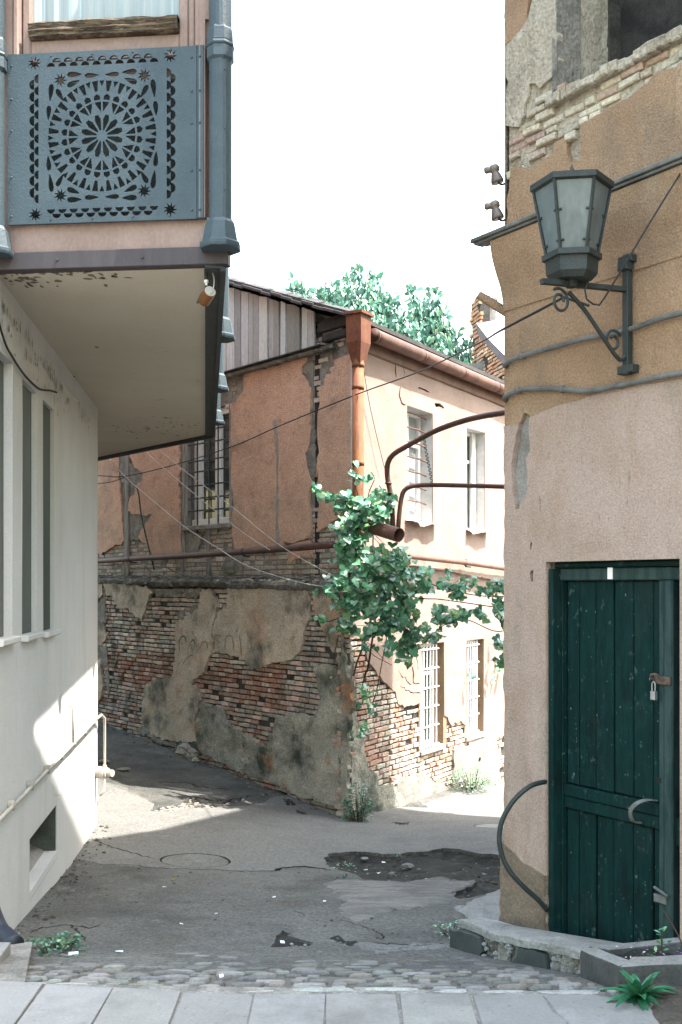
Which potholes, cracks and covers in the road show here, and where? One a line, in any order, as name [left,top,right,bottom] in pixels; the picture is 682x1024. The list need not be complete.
manhole cover [160,853,231,868]
pothole [330,935,357,946]
crack [29,924,101,941]
crack [58,839,331,883]
pothole [324,848,500,899]
pothole [271,930,313,947]
